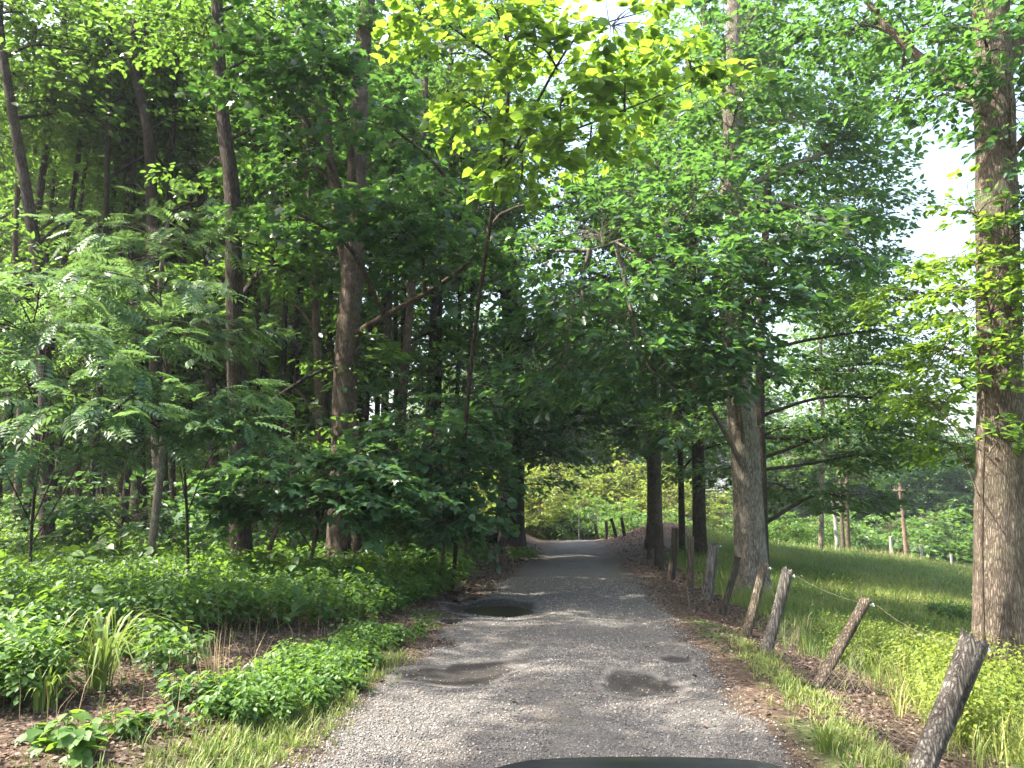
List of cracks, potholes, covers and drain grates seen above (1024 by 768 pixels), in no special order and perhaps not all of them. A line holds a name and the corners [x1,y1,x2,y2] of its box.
pothole [653,654,698,664]
pothole [434,596,555,620]
pothole [382,658,528,689]
pothole [590,667,693,700]
